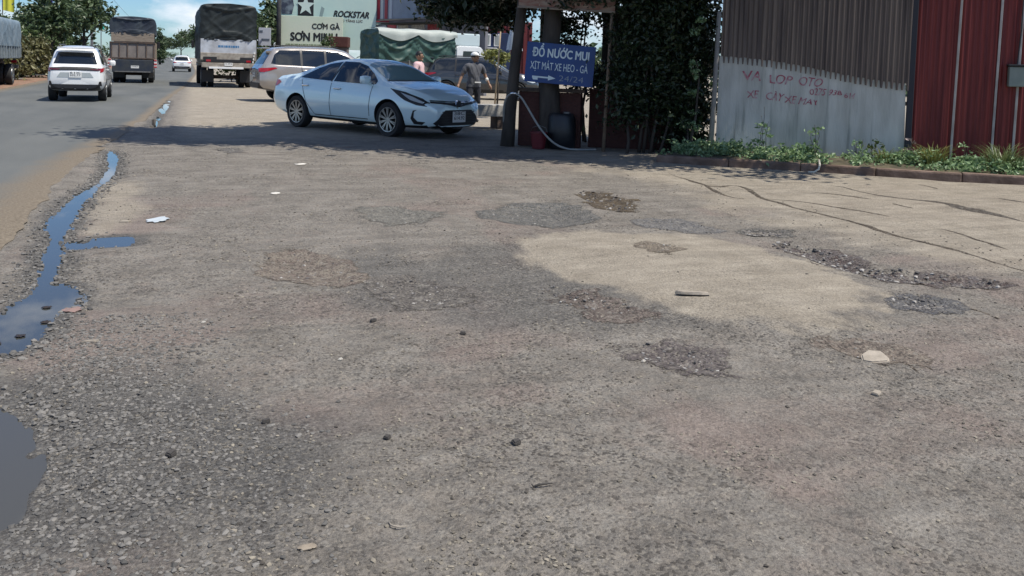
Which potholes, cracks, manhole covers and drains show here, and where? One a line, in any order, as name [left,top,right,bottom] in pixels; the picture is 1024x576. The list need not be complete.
pothole [607,338,745,379]
pothole [772,241,1021,291]
pothole [883,292,971,315]
pothole [735,228,797,238]
crack [676,176,1024,271]
pothole [633,241,687,255]
pothole [575,190,641,213]
